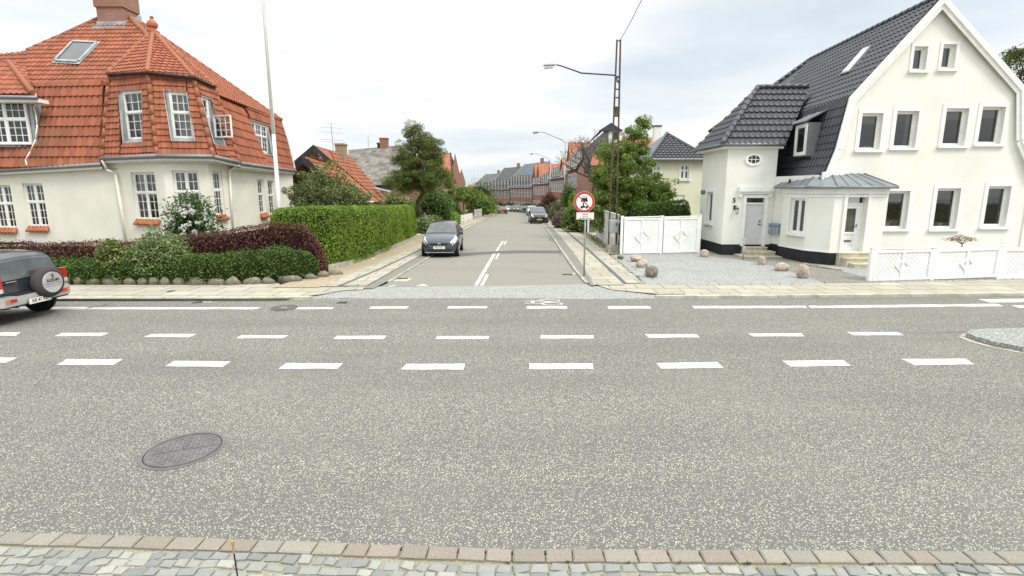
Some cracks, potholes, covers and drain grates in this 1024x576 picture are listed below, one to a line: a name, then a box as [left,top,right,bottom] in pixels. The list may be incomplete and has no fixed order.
manhole cover [137,431,226,470]
